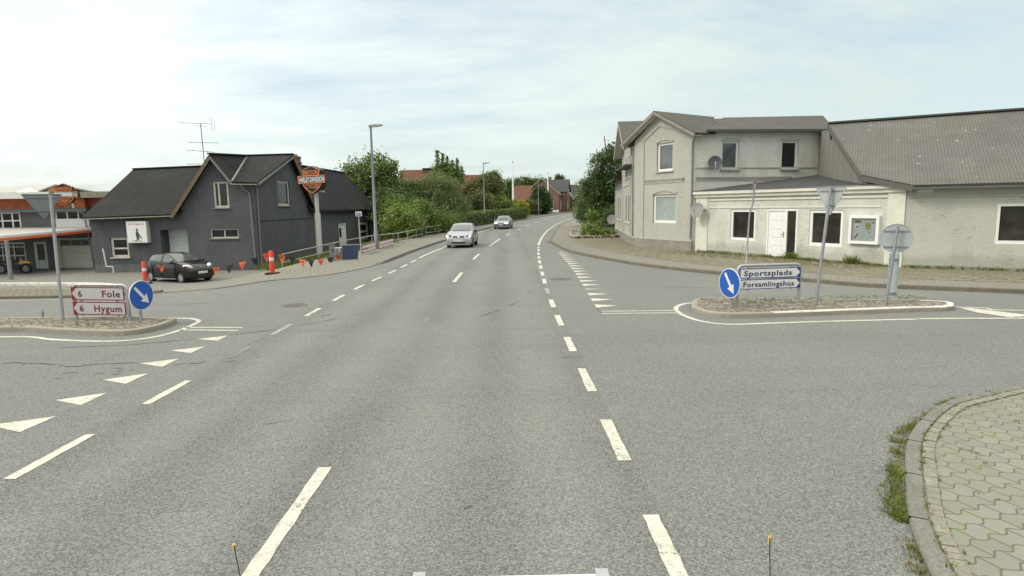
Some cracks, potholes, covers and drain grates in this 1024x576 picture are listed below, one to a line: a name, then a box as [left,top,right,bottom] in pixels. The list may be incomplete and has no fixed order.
crack [10,314,337,379]
